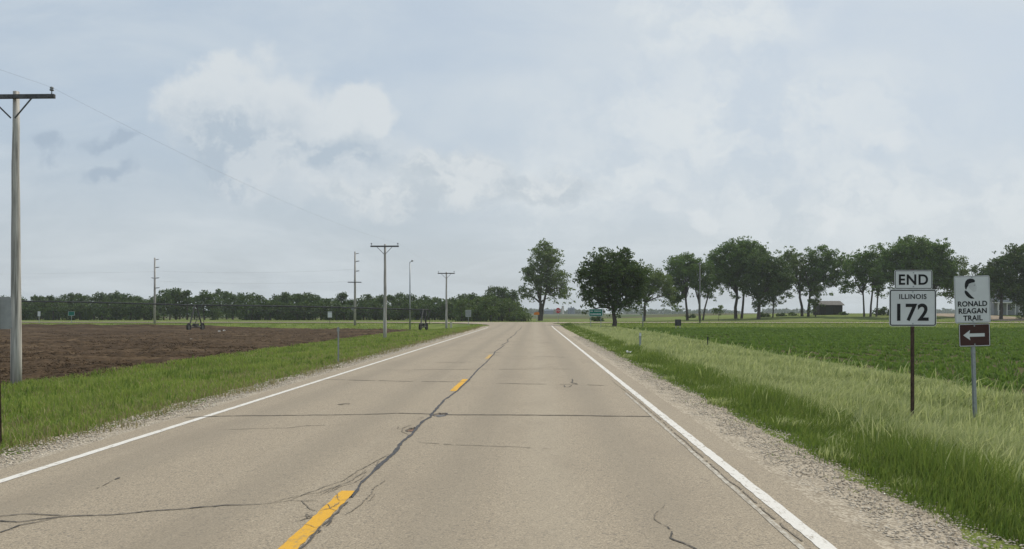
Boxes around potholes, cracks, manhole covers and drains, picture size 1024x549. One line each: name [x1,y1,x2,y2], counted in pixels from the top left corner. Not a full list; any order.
crack [329,362,472,382]
crack [0,455,389,549]
crack [199,380,811,549]
